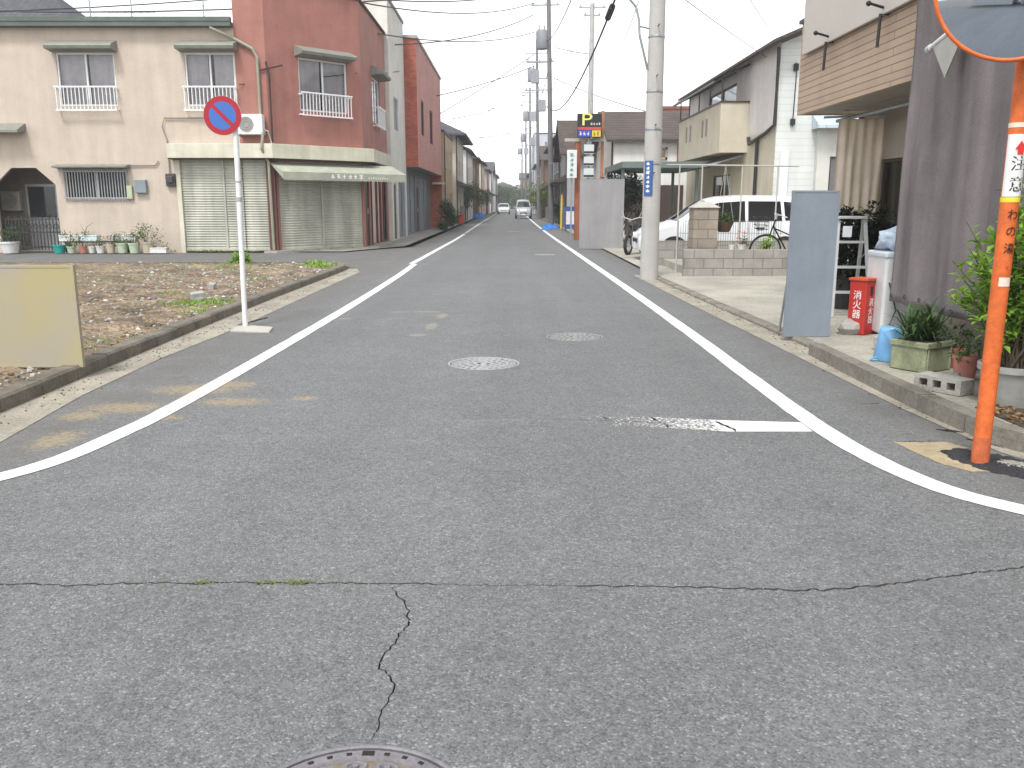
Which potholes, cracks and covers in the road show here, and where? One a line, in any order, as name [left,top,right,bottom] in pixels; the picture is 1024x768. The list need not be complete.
manhole cover [547,332,603,341]
manhole cover [448,357,520,370]
crack [0,565,1024,743]
manhole cover [277,744,452,768]
